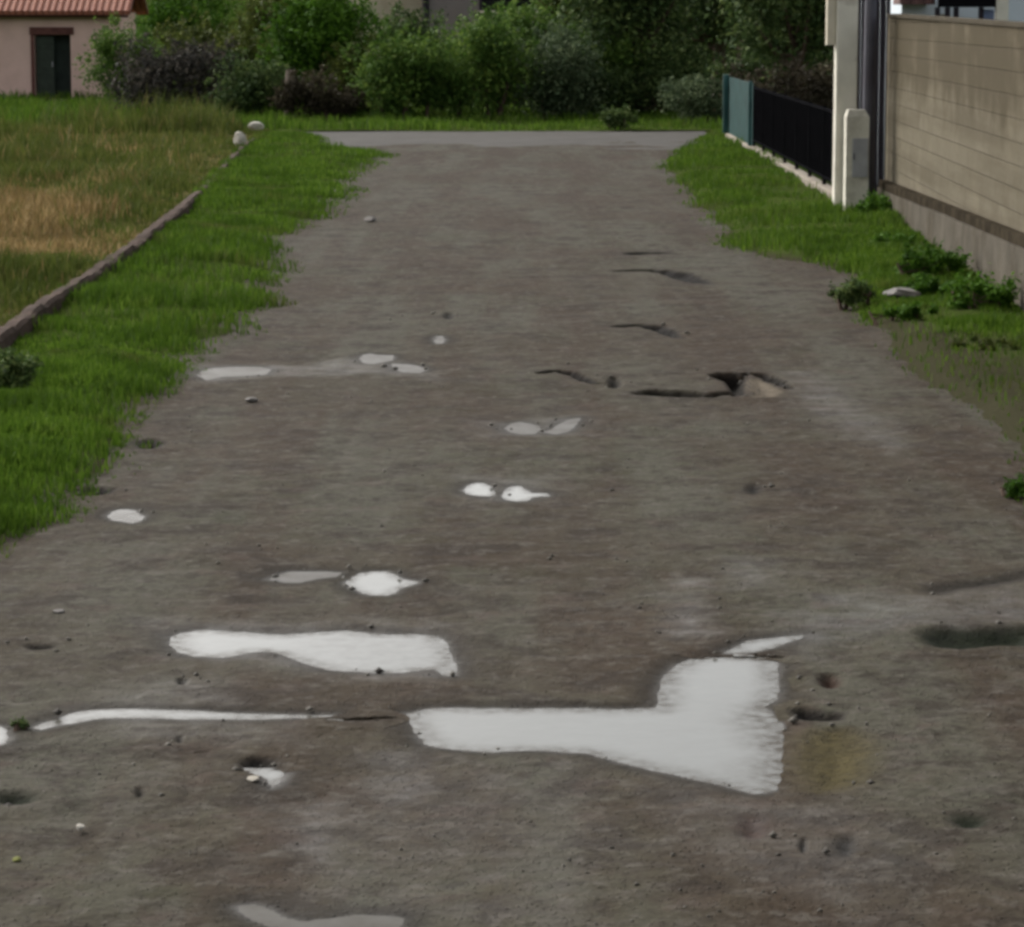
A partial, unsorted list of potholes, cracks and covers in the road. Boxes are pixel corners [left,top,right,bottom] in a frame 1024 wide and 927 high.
pothole [866,617,1024,660]
crack [502,366,831,407]
pothole [772,698,885,727]
crack [290,706,410,730]
crack [569,247,762,288]
pothole [348,645,836,803]
crack [570,320,727,343]
